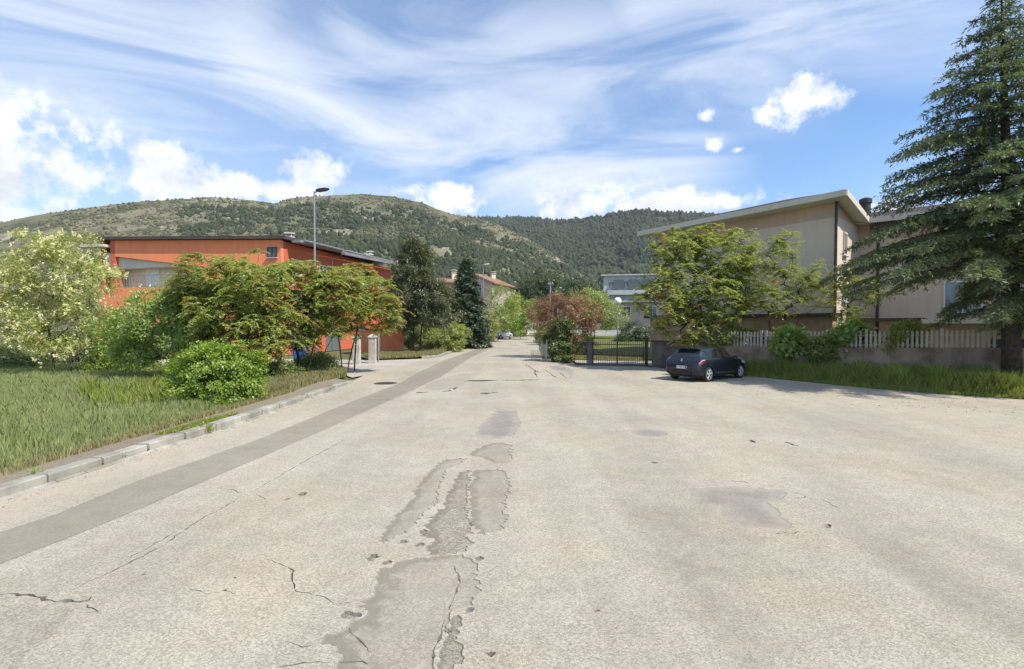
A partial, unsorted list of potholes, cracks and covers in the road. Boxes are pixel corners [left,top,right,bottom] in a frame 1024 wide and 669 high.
pothole [340,611,362,619]
crack [71,489,241,590]
crack [267,559,349,604]
crack [0,593,98,613]
